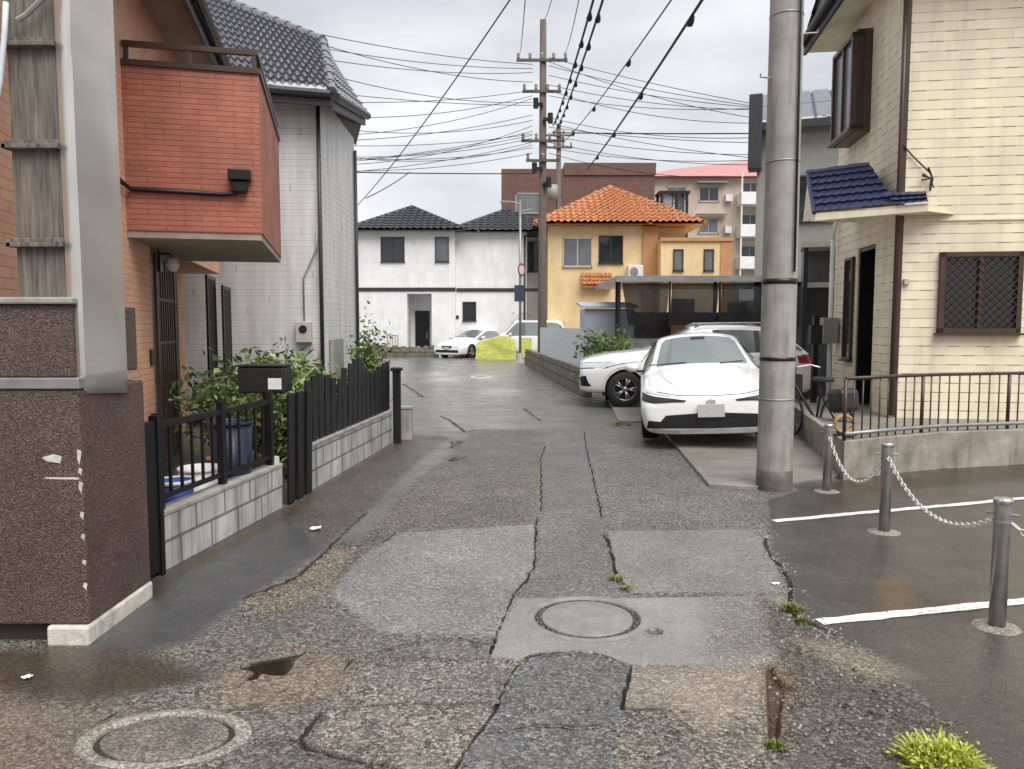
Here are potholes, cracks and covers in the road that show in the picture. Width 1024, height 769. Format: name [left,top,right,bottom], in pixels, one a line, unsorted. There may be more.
pothole [761,664,802,744]
manhole cover [75,709,252,769]
crack [239,512,436,608]
pothole [219,649,311,683]
crack [522,408,628,588]
crack [760,535,839,636]
manhole cover [526,596,649,642]
